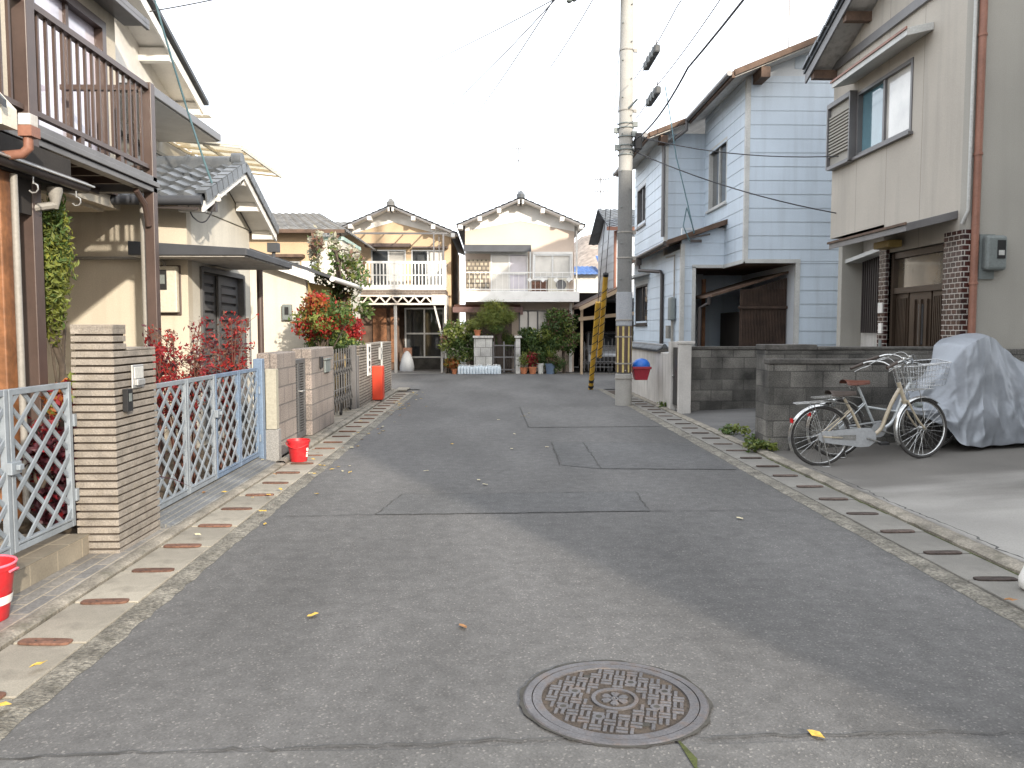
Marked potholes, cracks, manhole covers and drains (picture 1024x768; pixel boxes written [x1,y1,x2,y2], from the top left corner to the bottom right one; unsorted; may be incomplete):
manhole cover [519,660,713,748]
